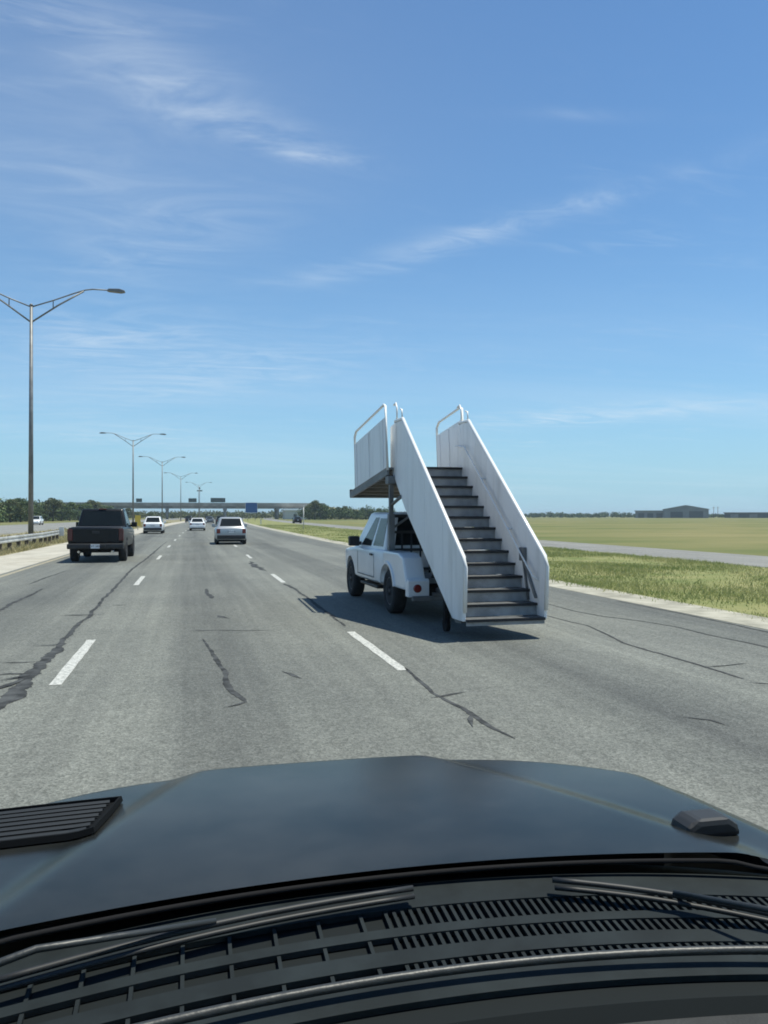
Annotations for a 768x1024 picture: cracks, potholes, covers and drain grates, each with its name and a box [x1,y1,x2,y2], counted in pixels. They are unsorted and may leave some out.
crack [550,604,768,684]
crack [0,571,64,611]
